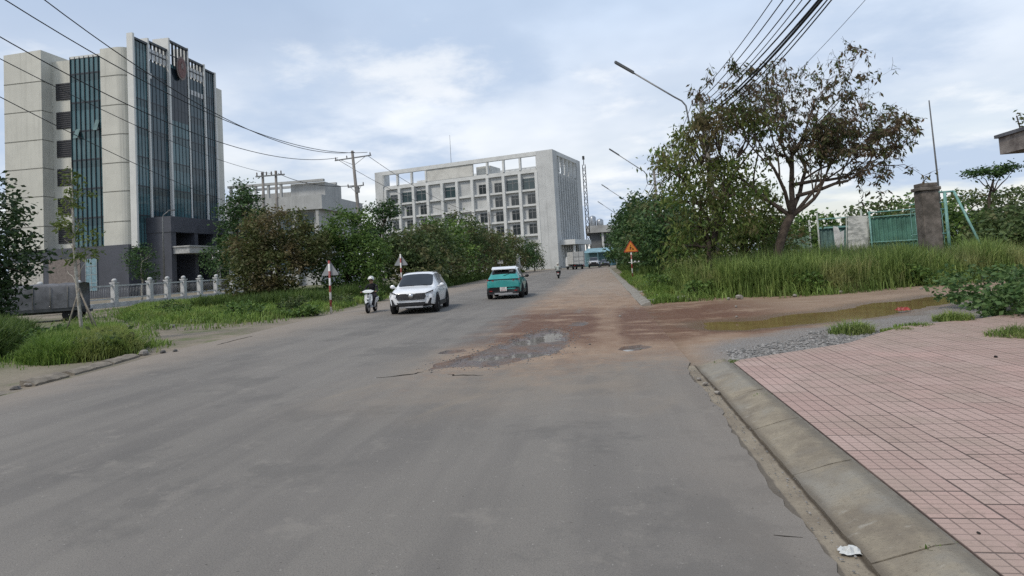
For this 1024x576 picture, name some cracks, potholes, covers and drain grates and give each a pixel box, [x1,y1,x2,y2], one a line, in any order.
pothole [429,329,570,370]
